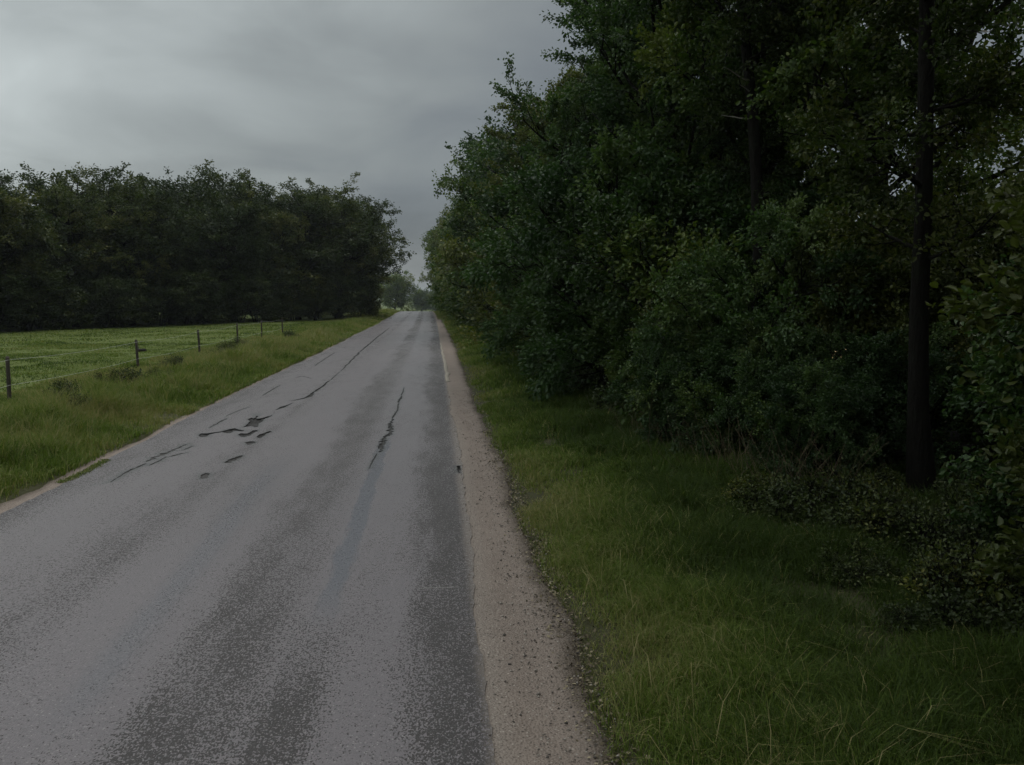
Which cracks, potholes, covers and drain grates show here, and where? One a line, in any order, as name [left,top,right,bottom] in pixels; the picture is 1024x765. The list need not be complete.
pothole [199,416,269,437]
crack [111,444,192,482]
crack [369,389,404,468]
crack [211,329,388,427]
